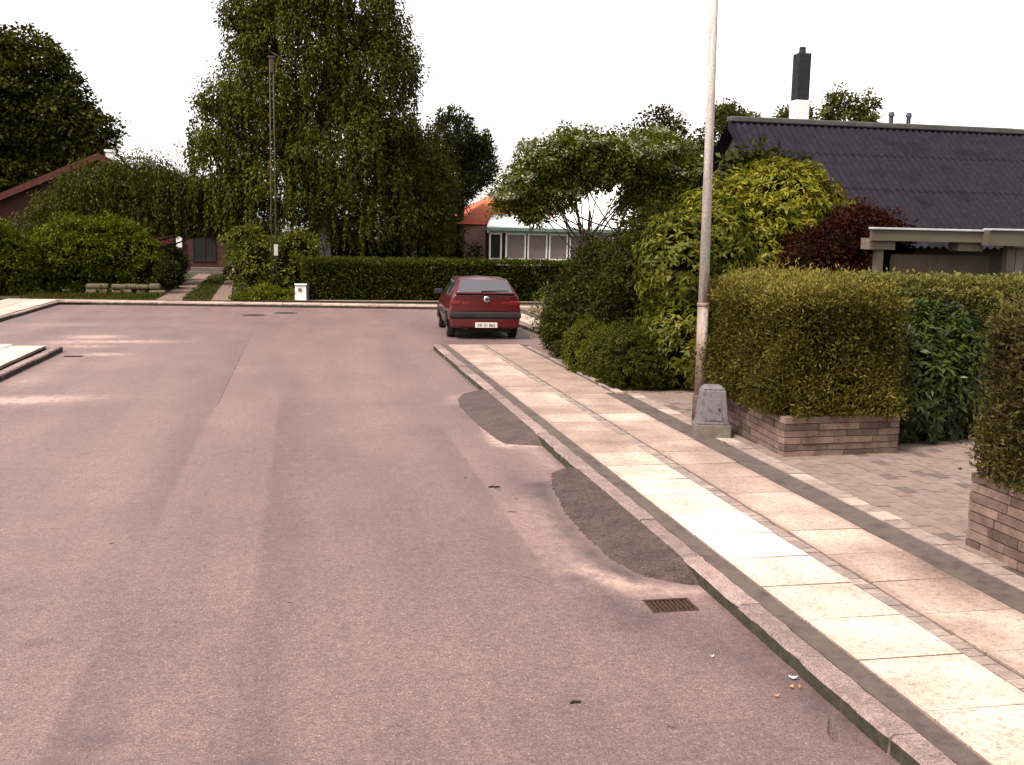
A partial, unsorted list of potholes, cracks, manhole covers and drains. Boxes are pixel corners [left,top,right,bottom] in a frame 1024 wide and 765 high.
drain grate [642,597,699,613]
